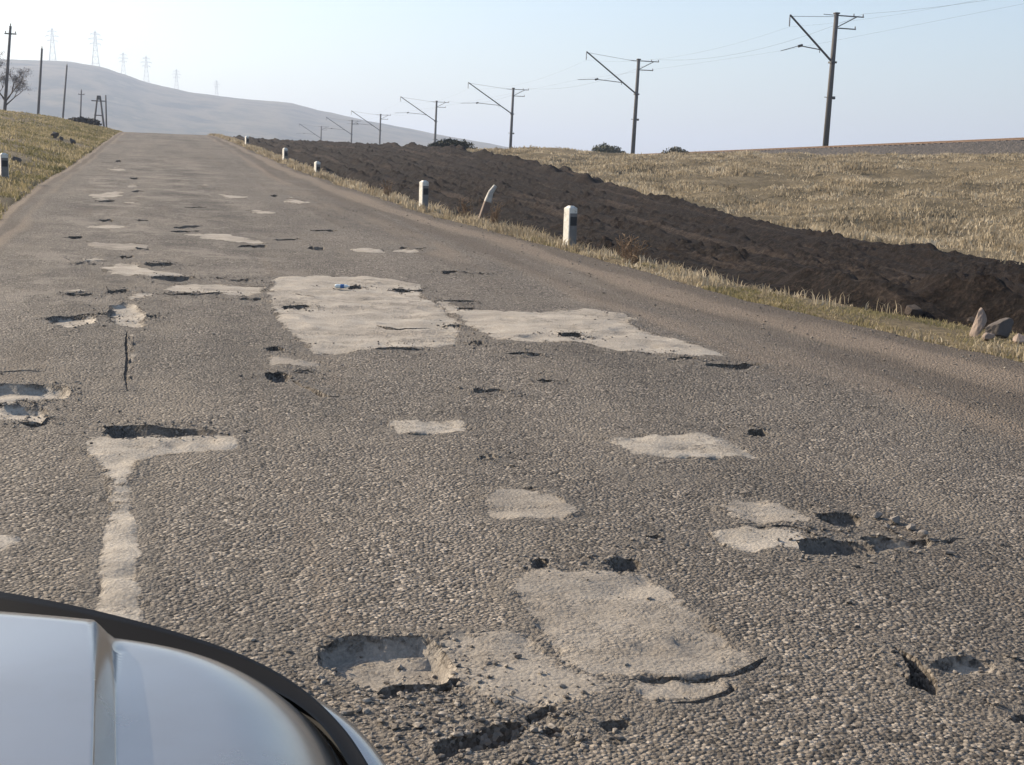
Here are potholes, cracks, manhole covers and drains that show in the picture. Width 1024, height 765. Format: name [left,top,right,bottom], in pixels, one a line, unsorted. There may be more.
pothole [860,535,931,554]
pothole [931,655,996,674]
pothole [22,417,50,428]
pothole [815,512,861,528]
pothole [891,645,938,695]
pothole [377,678,462,699]
pothole [796,537,899,556]
pothole [317,635,458,691]
pothole [0,405,49,423]
pothole [432,721,528,763]
pothole [0,383,71,404]
pothole [608,556,642,572]
